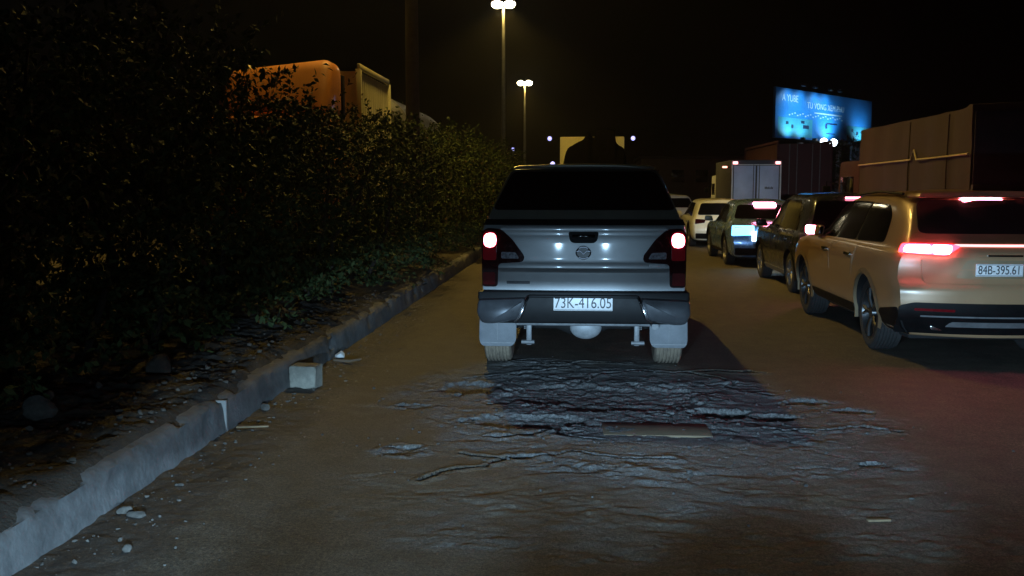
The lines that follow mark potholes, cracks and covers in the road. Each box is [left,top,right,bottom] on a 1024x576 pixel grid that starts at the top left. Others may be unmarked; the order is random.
pothole [378,445,430,456]
pothole [456,413,588,433]
pothole [475,381,714,417]
pothole [829,407,875,415]
pothole [438,381,503,397]
crack [417,429,653,481]
pothole [782,398,831,406]
pothole [395,402,450,410]
pothole [750,413,800,422]
pothole [685,408,757,421]
pothole [857,461,894,469]
